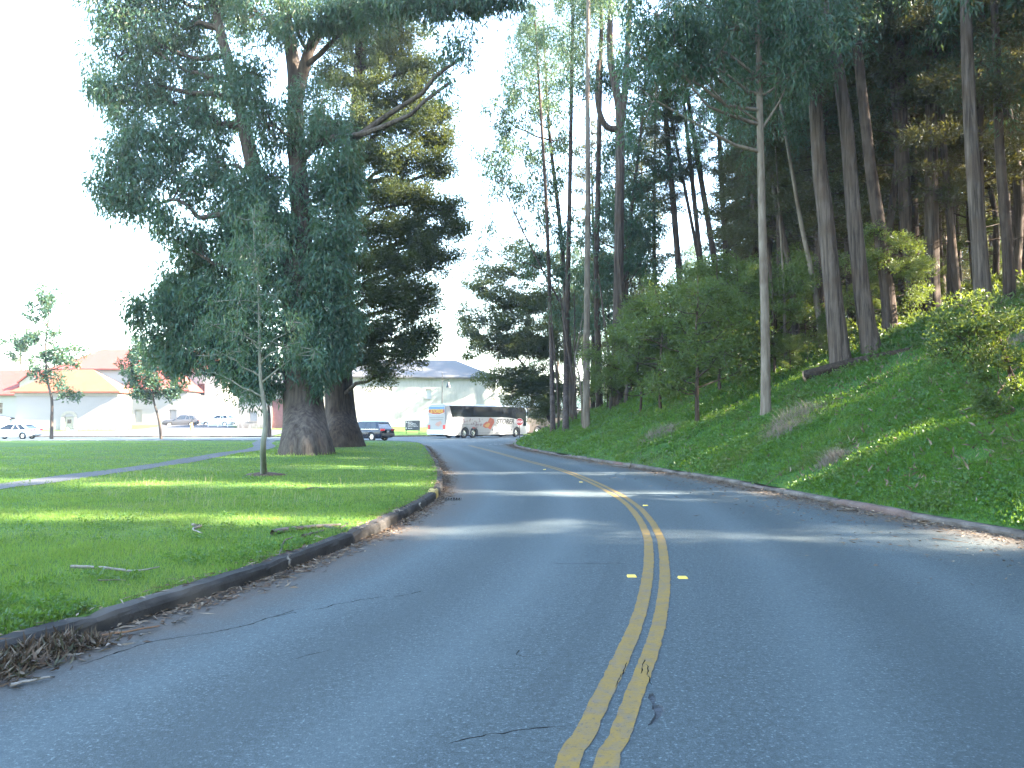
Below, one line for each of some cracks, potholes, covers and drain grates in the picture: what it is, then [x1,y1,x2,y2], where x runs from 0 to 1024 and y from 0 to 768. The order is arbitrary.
crack [85,591,421,664]
crack [448,726,563,744]
